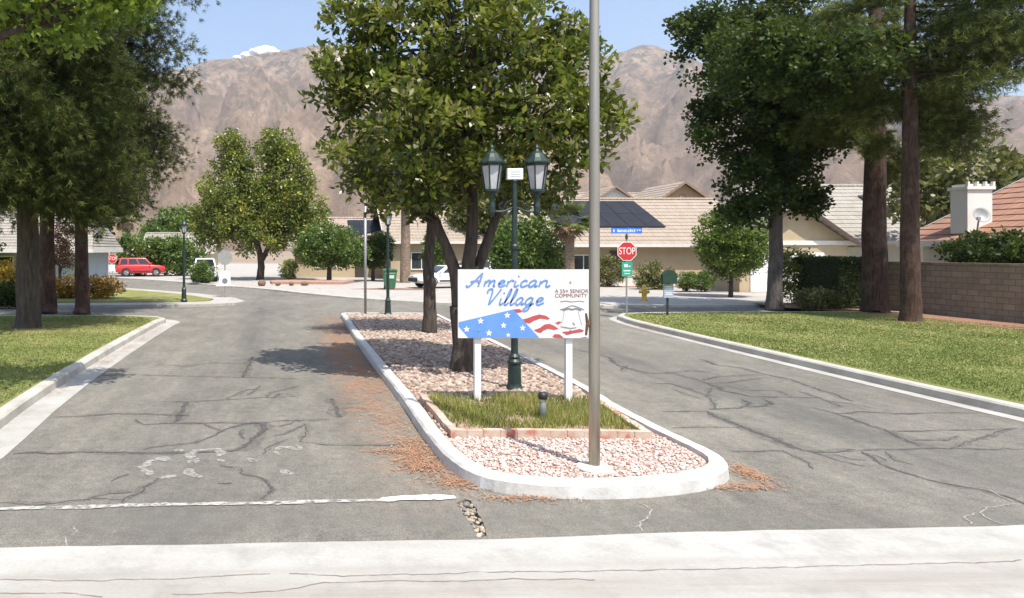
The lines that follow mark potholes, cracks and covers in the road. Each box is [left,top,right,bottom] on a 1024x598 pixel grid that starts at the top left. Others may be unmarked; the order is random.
crack [262,421,397,454]
crack [963,490,1015,524]
crack [1,473,160,506]
crack [816,408,1012,448]
crack [69,357,300,424]
crack [219,465,274,499]
